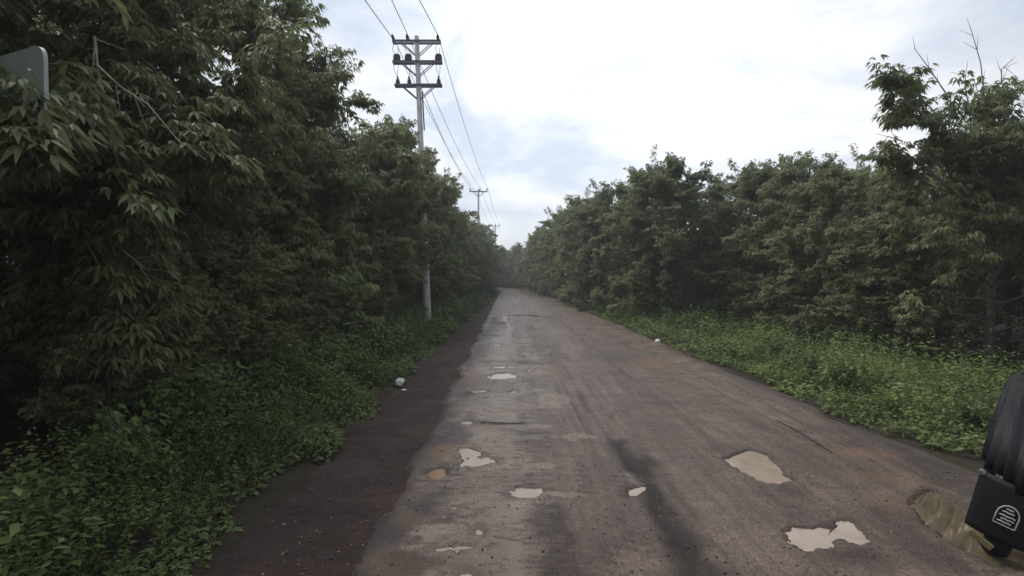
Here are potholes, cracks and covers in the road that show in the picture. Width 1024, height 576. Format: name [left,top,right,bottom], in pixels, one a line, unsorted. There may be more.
pothole [420,533,491,556]
pothole [503,484,552,500]
pothole [620,483,653,500]
pothole [421,464,452,480]
pothole [778,516,878,553]
pothole [484,371,522,380]
pothole [902,487,1024,571]
crack [776,420,832,453]
pothole [719,446,798,485]
pothole [446,445,503,472]
